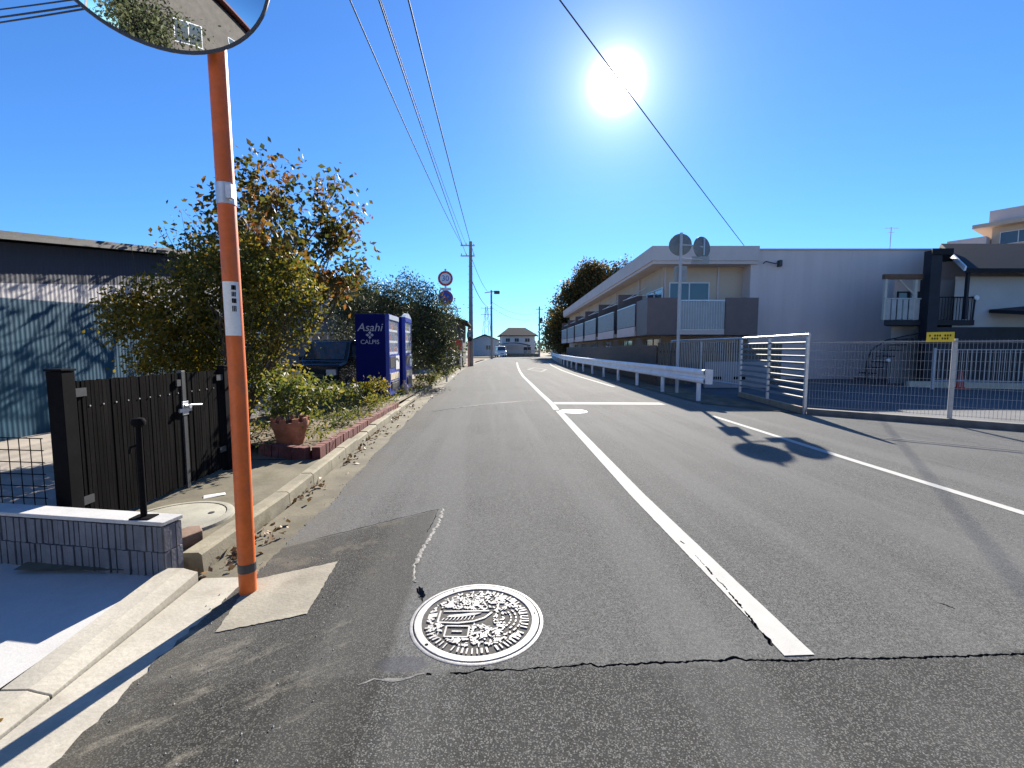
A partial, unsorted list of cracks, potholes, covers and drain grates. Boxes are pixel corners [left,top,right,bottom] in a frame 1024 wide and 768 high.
manhole cover [147,501,235,531]
manhole cover [409,584,543,669]
crack [358,541,1024,685]
